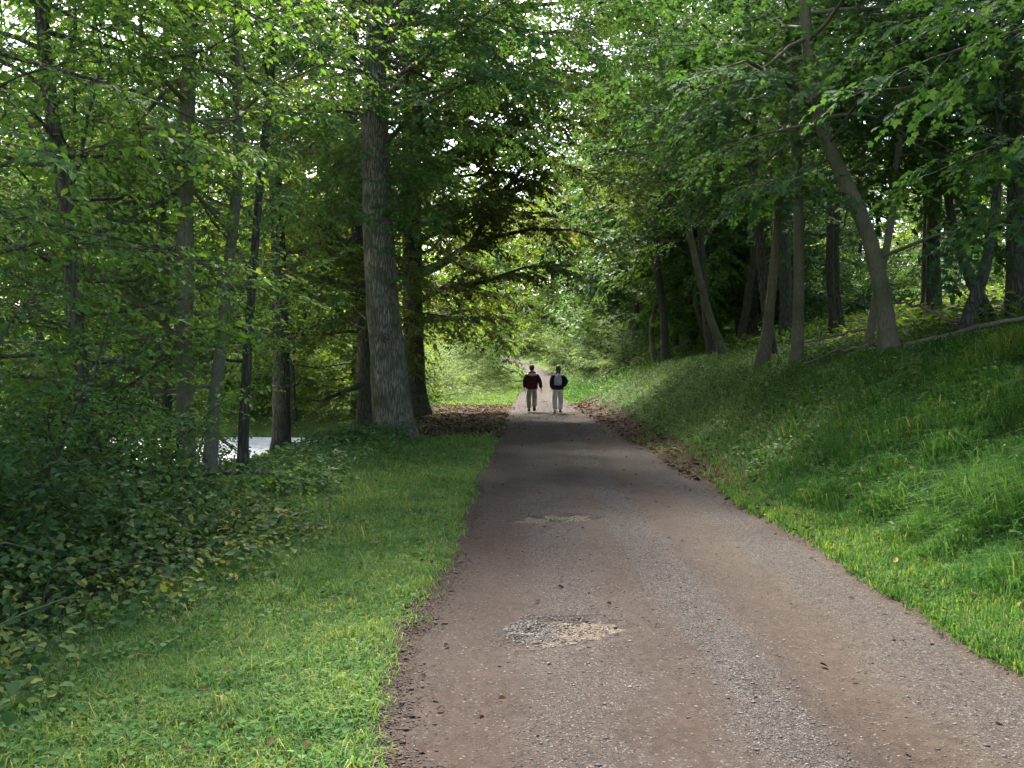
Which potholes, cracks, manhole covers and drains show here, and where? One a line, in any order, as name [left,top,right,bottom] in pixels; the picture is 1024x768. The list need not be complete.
pothole [490,610,635,655]
